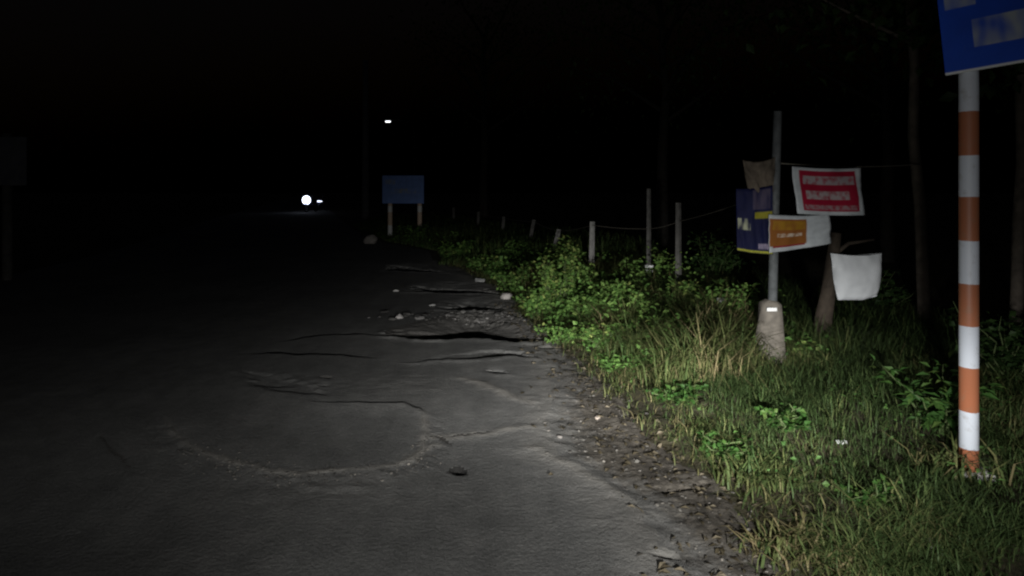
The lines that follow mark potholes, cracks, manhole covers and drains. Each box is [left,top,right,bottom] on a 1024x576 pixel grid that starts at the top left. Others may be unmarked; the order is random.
crack [434,431,490,445]
crack [98,434,131,467]
